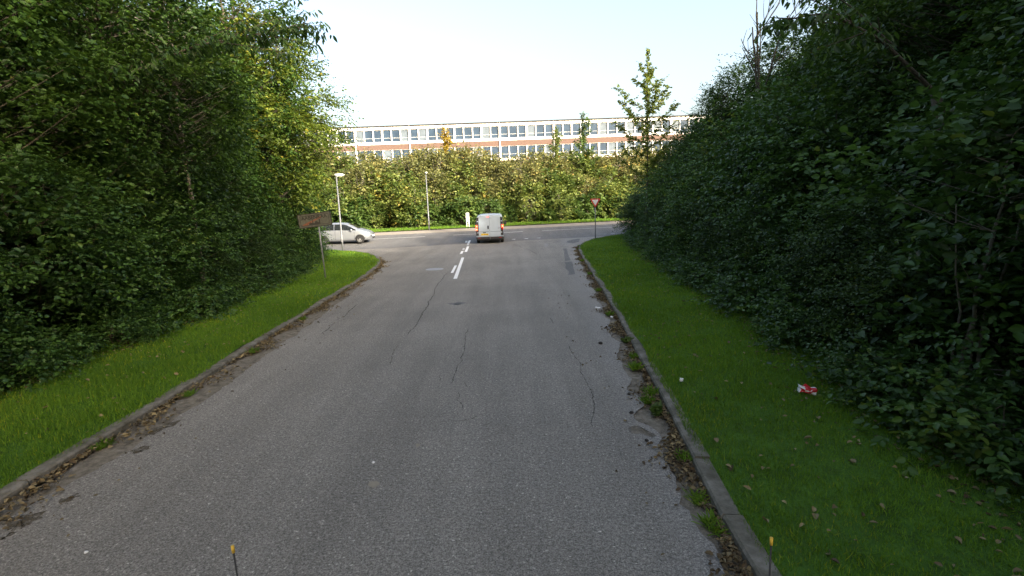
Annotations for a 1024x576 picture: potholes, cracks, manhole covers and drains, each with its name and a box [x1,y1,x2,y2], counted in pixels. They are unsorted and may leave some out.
crack [436,330,479,428]
